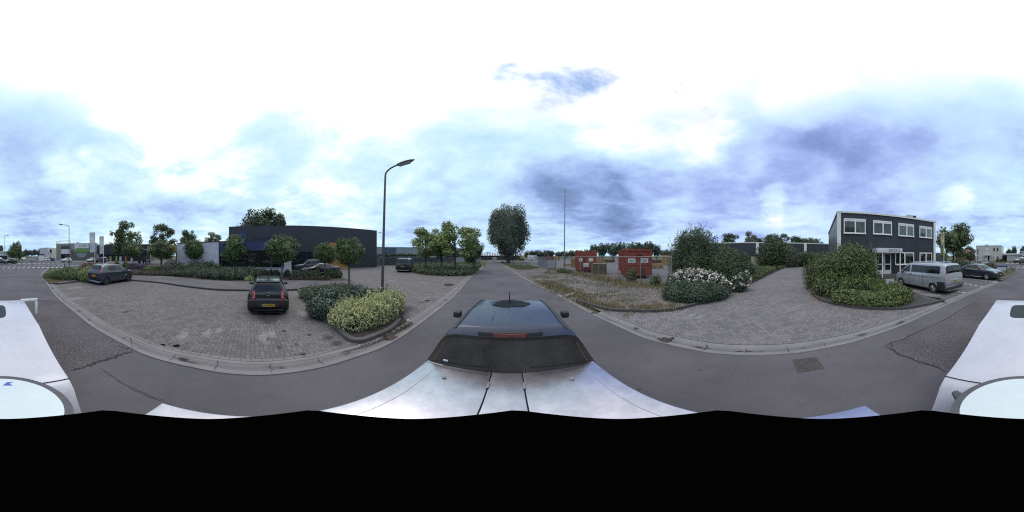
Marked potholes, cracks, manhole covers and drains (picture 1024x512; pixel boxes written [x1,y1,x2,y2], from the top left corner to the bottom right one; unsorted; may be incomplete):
manhole cover [792,357,825,372]
